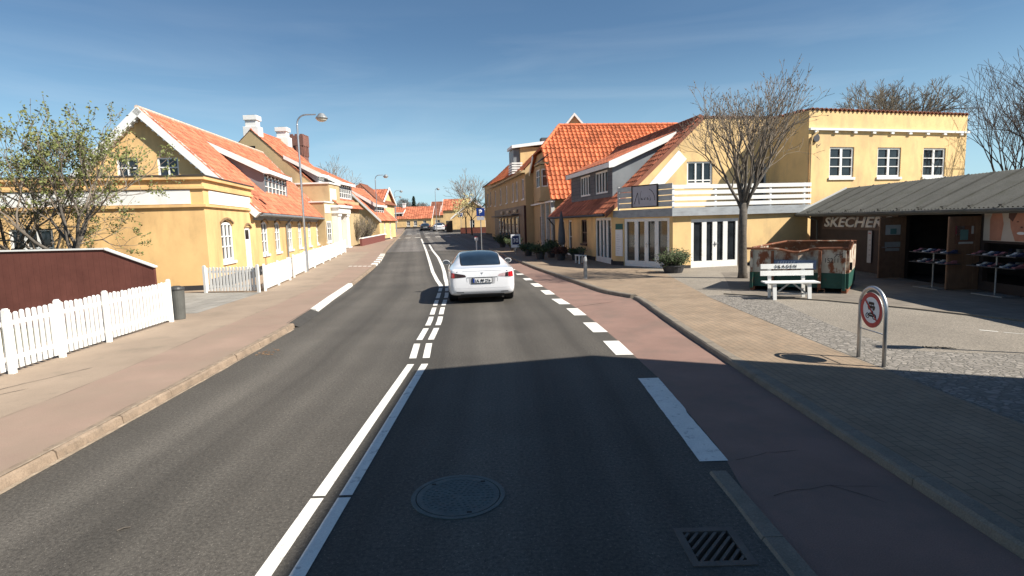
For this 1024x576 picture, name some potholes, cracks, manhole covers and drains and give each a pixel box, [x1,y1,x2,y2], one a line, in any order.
drain grate [673,527,759,567]
manhole cover [411,475,505,520]
